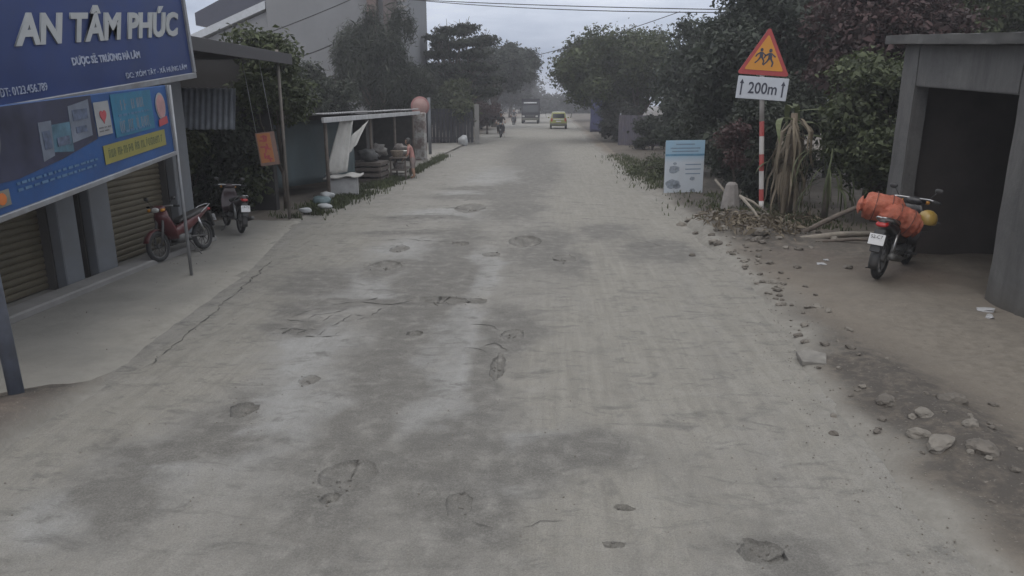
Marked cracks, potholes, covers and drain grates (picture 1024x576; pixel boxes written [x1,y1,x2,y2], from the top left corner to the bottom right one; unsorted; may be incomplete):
pothole [401,296,471,306]
pothole [453,203,488,213]
pothole [736,538,794,564]
pothole [317,492,340,506]
pothole [509,235,542,247]
pothole [313,459,380,495]
pothole [389,244,410,253]
pothole [500,329,524,342]
crack [269,298,408,337]
pothole [465,296,487,304]
pothole [445,491,473,518]
pothole [229,402,261,418]
